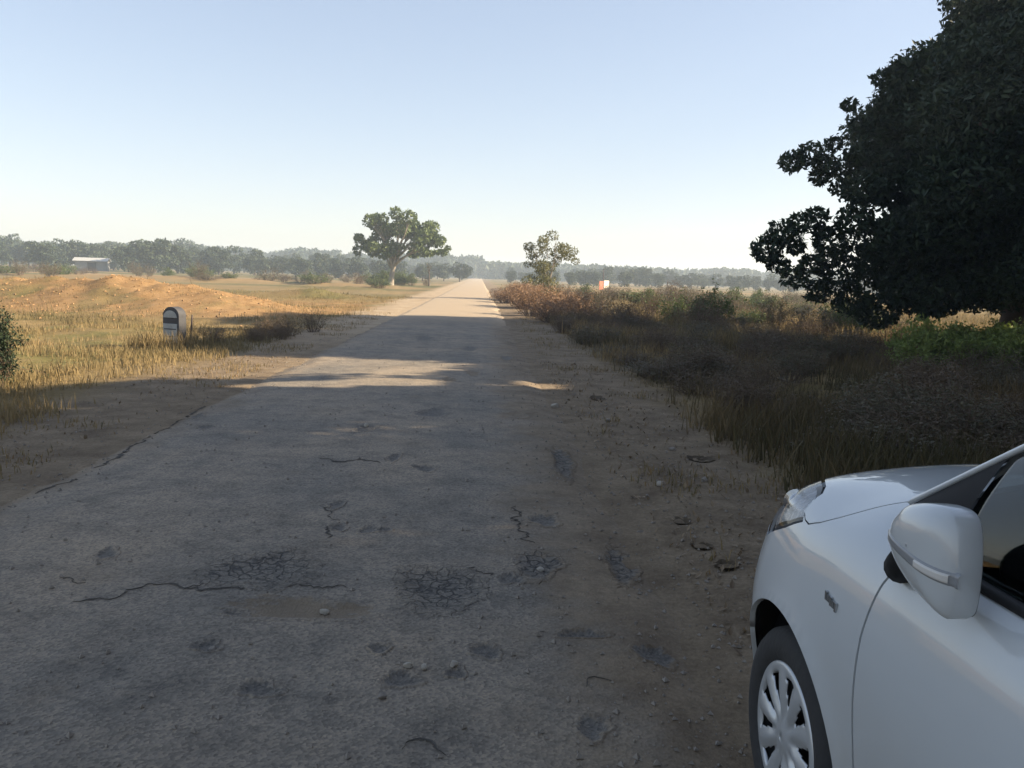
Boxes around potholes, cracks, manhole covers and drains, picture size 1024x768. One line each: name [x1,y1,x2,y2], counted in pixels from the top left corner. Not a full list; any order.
crack [402,737,446,755]
pothole [464,640,505,662]
pothole [89,544,121,561]
pothole [375,667,428,689]
pothole [626,643,679,672]
crack [63,577,346,602]
pothole [547,444,577,486]
pothole [572,711,617,747]
pothole [326,499,348,511]
pothole [601,540,644,589]
crack [510,506,535,543]
pothole [549,627,616,639]
